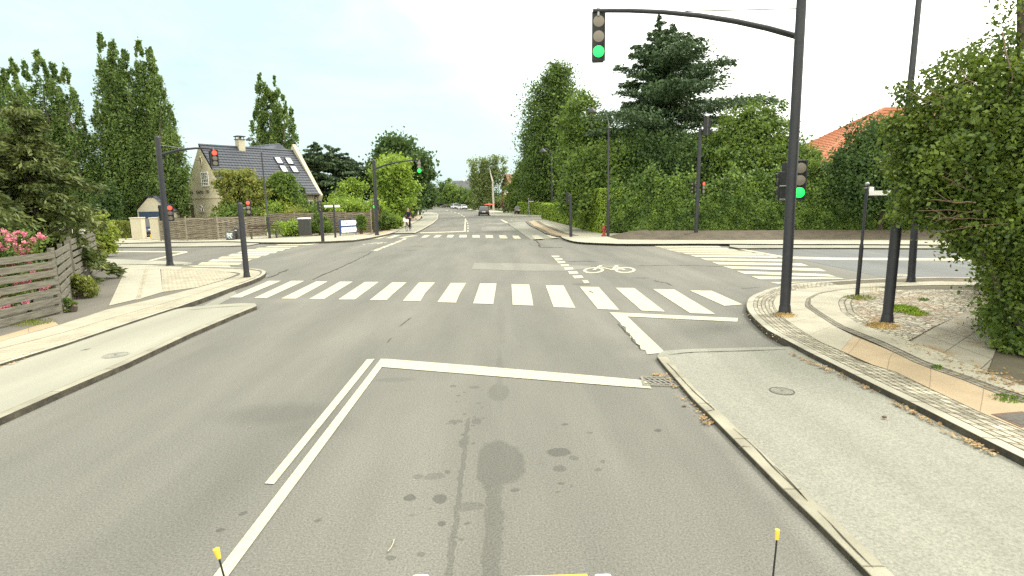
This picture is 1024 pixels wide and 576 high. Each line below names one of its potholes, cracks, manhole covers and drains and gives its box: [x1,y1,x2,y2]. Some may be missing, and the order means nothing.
drain grate [639,376,679,387]
manhole cover [769,387,795,395]
